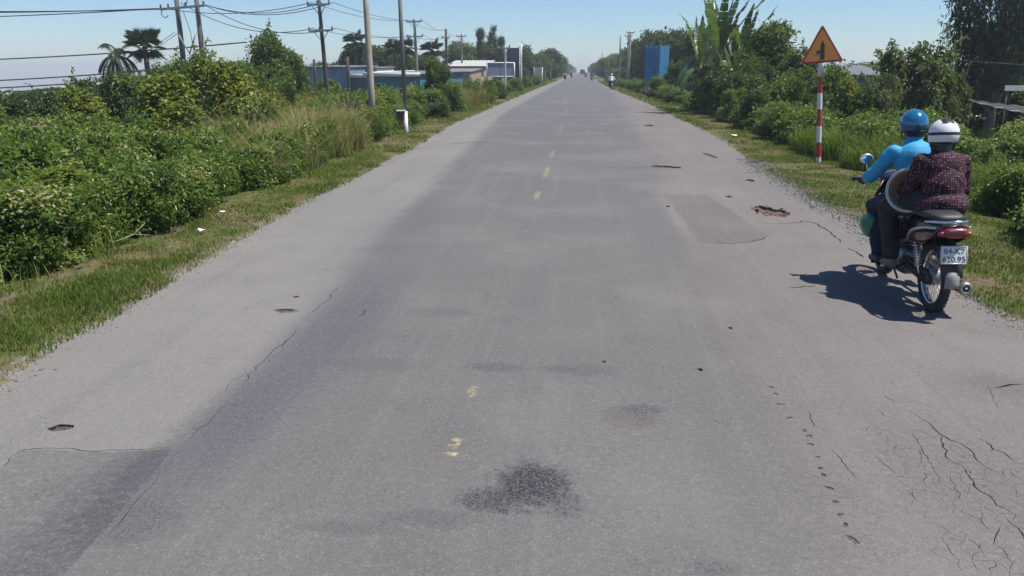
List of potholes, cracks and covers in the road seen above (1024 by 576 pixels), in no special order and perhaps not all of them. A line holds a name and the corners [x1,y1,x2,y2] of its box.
crack [709,221,863,257]
pothole [751,205,790,217]
crack [866,387,1024,574]
crack [108,284,342,536]
